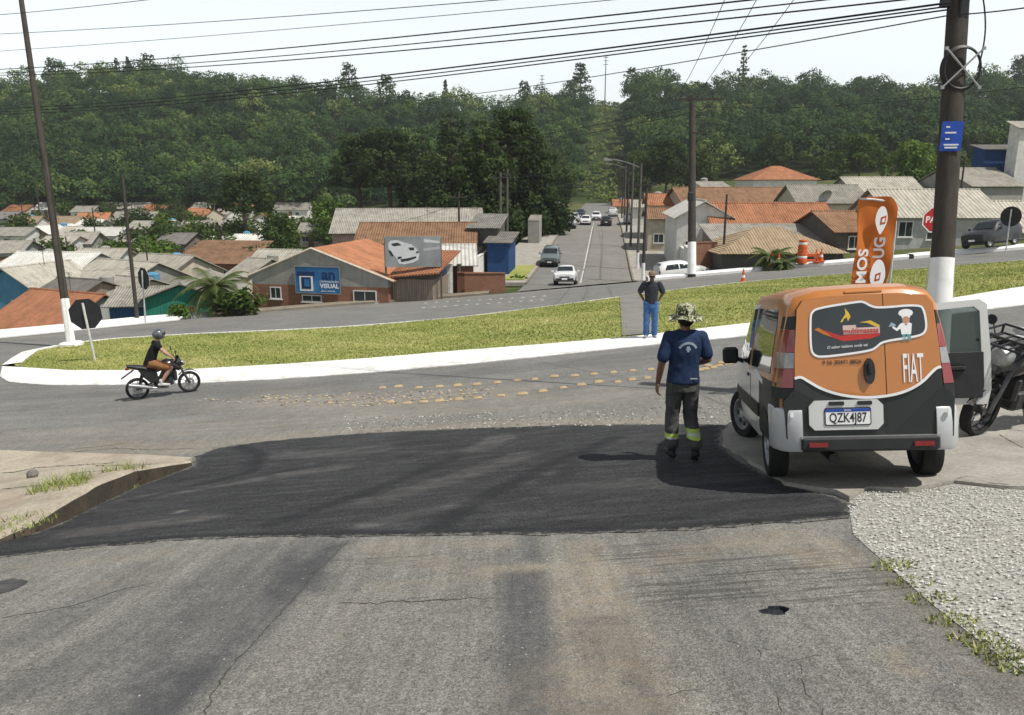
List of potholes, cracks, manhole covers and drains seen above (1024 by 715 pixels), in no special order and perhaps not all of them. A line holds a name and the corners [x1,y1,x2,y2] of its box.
crack [2,582,153,618]
crack [204,540,427,715]
crack [723,639,824,715]
pothole [759,605,789,615]
crack [340,597,487,624]
